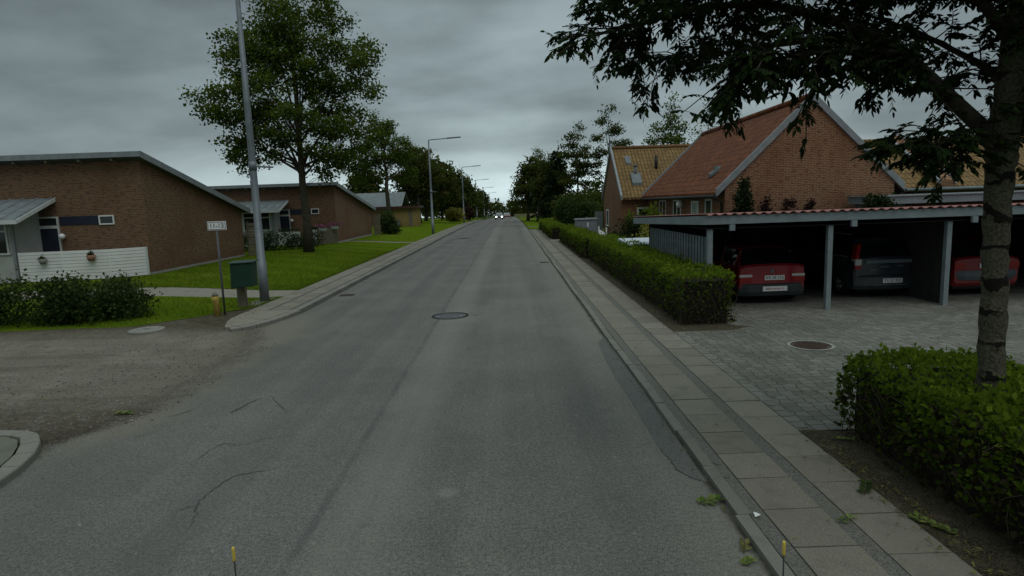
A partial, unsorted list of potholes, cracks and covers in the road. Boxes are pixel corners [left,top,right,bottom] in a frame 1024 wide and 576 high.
manhole cover [127,326,165,335]
crack [180,464,286,524]
manhole cover [787,340,835,350]
